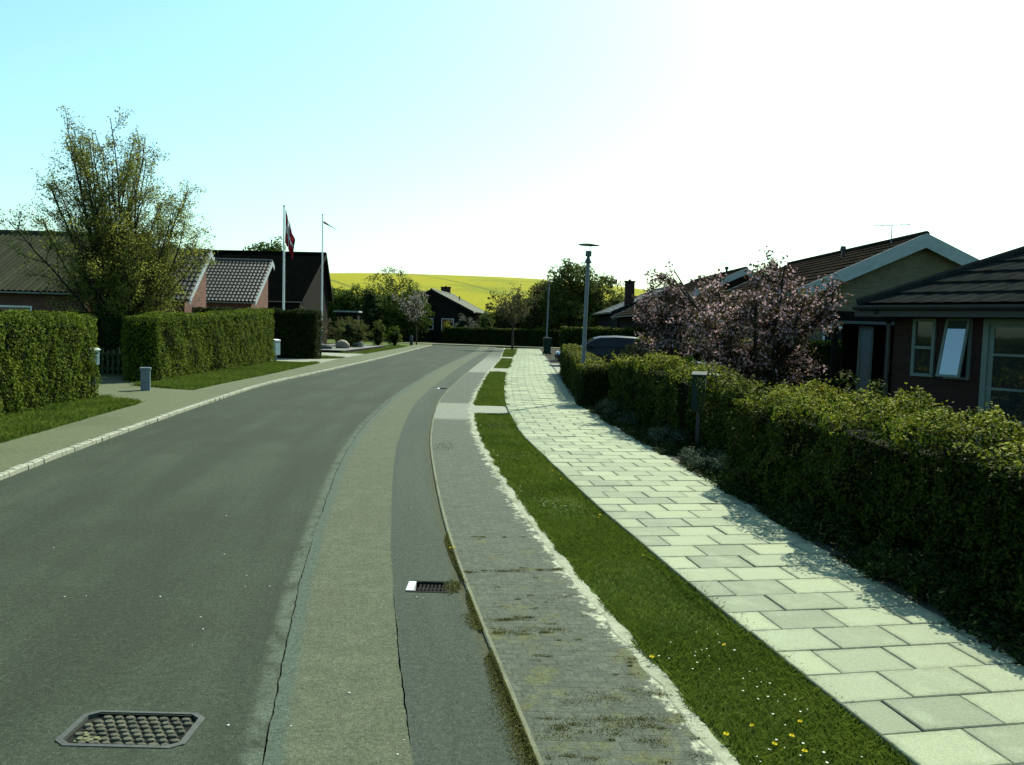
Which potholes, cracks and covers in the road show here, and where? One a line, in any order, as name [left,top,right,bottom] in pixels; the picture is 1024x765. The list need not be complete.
drain grate [405,580,449,593]
manhole cover [54,710,206,749]
